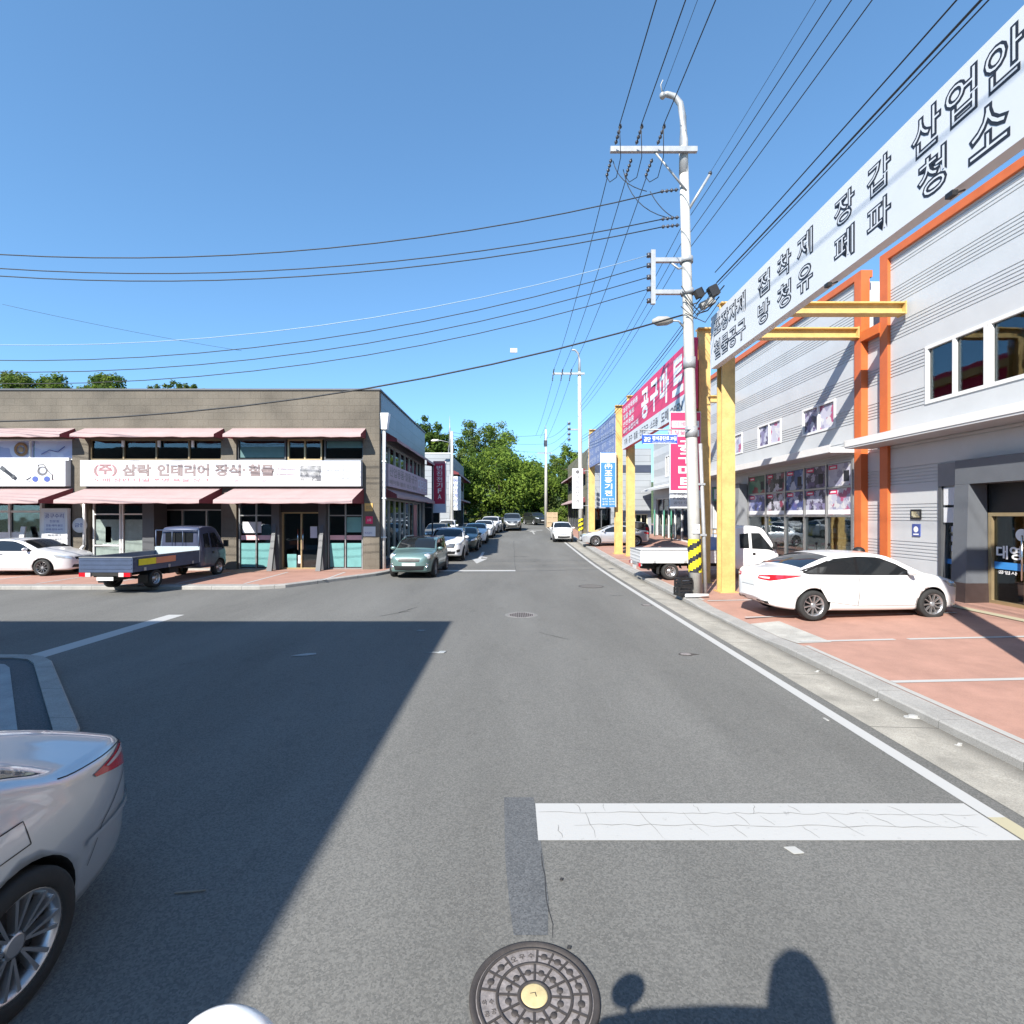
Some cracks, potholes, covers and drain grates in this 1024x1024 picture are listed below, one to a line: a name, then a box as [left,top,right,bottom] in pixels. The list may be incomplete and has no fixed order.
crack [541,853,553,936]
manhole cover [469,941,600,1024]
